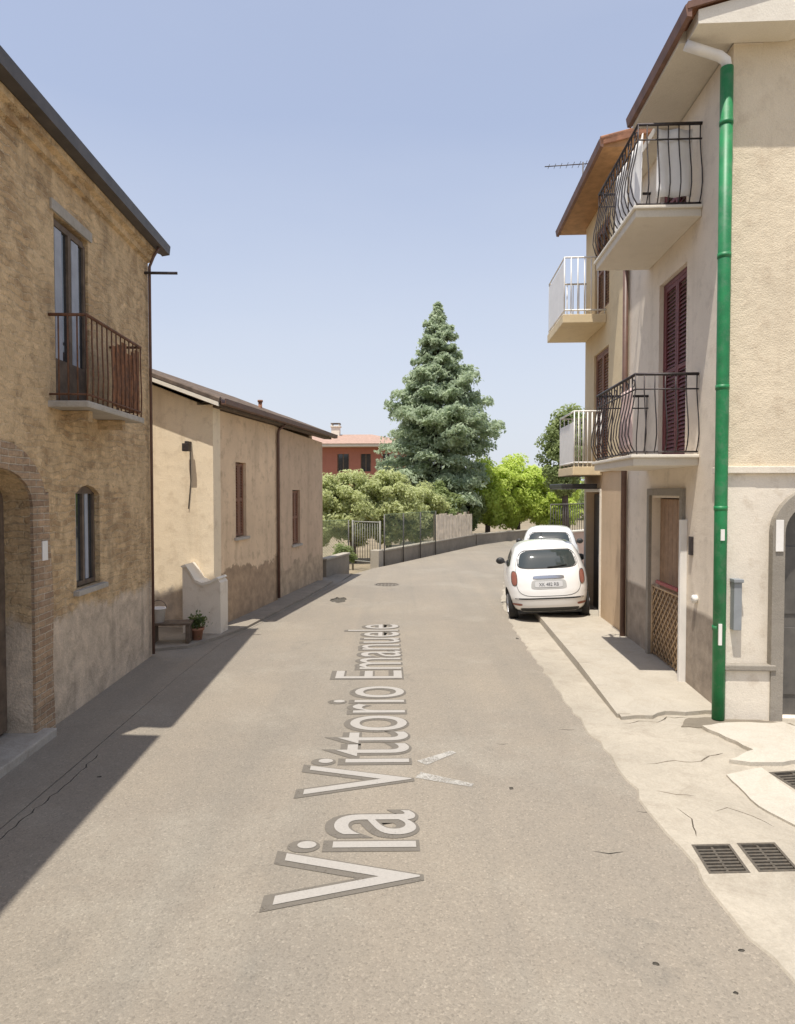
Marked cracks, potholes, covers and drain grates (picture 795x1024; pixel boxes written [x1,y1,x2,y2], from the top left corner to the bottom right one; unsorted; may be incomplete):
crack [654,753,722,764]
drain grate [691,844,751,874]
crack [660,791,696,834]
drain grate [769,770,795,789]
crack [0,756,97,839]
drain grate [737,842,795,872]
